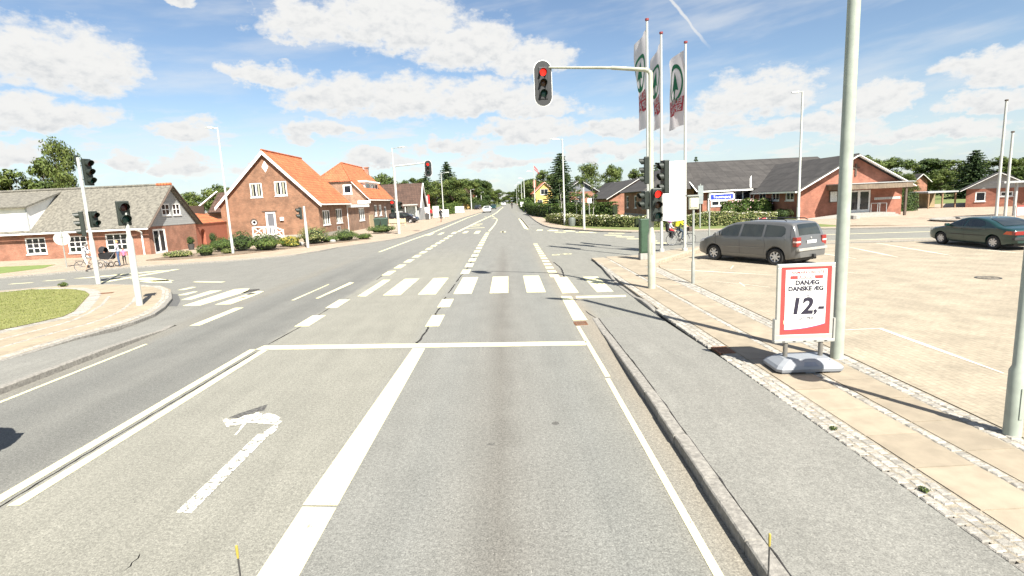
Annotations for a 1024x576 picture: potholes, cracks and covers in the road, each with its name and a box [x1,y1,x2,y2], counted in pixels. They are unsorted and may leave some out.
drain grate [711,346,736,355]
crack [416,253,477,343]
